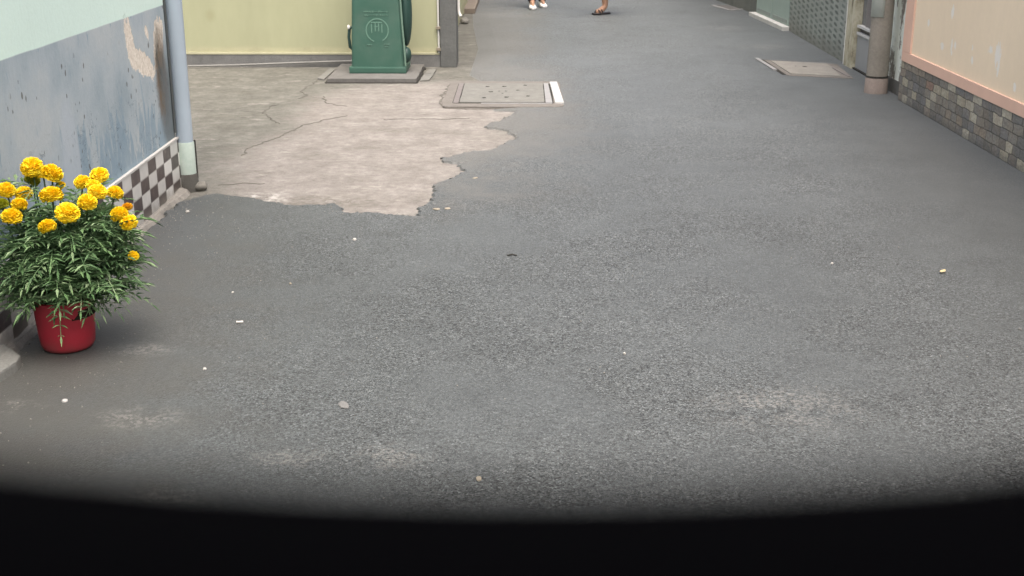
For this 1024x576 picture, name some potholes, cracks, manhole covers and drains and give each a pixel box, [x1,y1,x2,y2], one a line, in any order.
manhole cover [755,58,854,79]
crack [241,79,348,156]
manhole cover [442,81,564,109]
crack [388,77,490,120]
